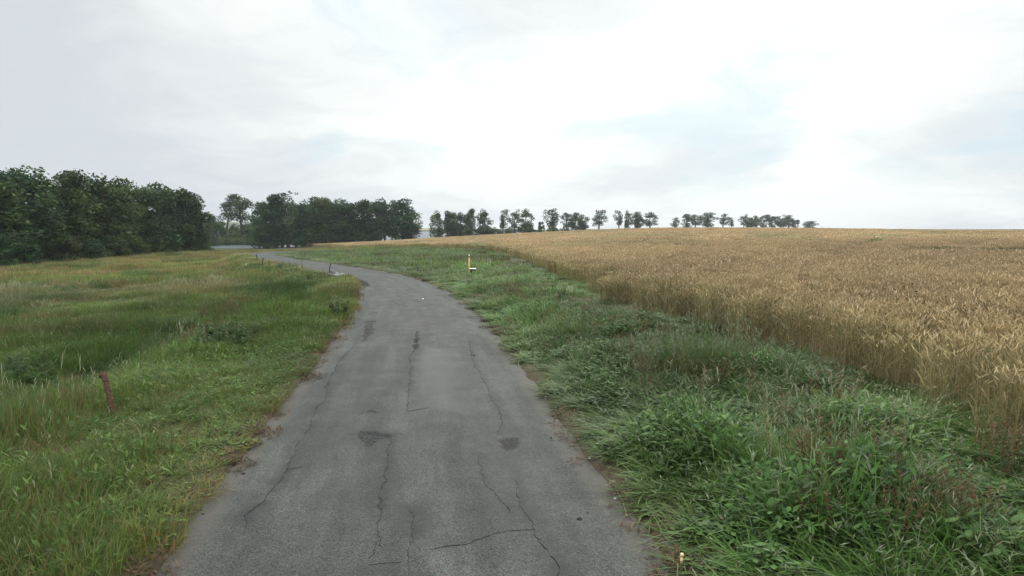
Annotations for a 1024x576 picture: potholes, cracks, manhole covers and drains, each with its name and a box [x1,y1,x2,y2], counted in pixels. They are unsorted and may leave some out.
crack [370,438,413,565]
crack [430,459,558,576]
crack [242,350,350,535]
